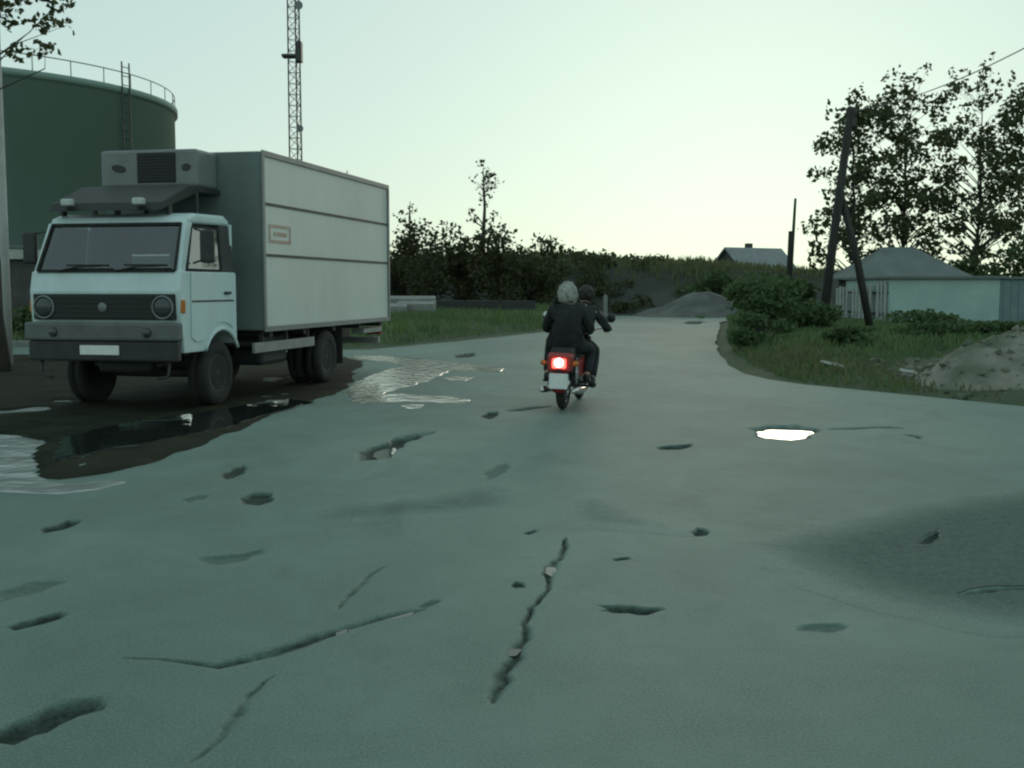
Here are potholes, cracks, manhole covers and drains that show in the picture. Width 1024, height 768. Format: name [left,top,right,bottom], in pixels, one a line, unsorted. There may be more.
pothole [592,604,667,615]
pothole [36,518,84,536]
crack [483,538,571,704]
pothole [193,548,270,566]
pothole [745,424,826,441]
pothole [5,610,72,632]
pothole [791,622,854,633]
pothole [918,528,942,545]
pothole [236,491,276,506]
pothole [351,429,440,463]
crack [122,566,427,765]
crack [957,586,1024,594]
